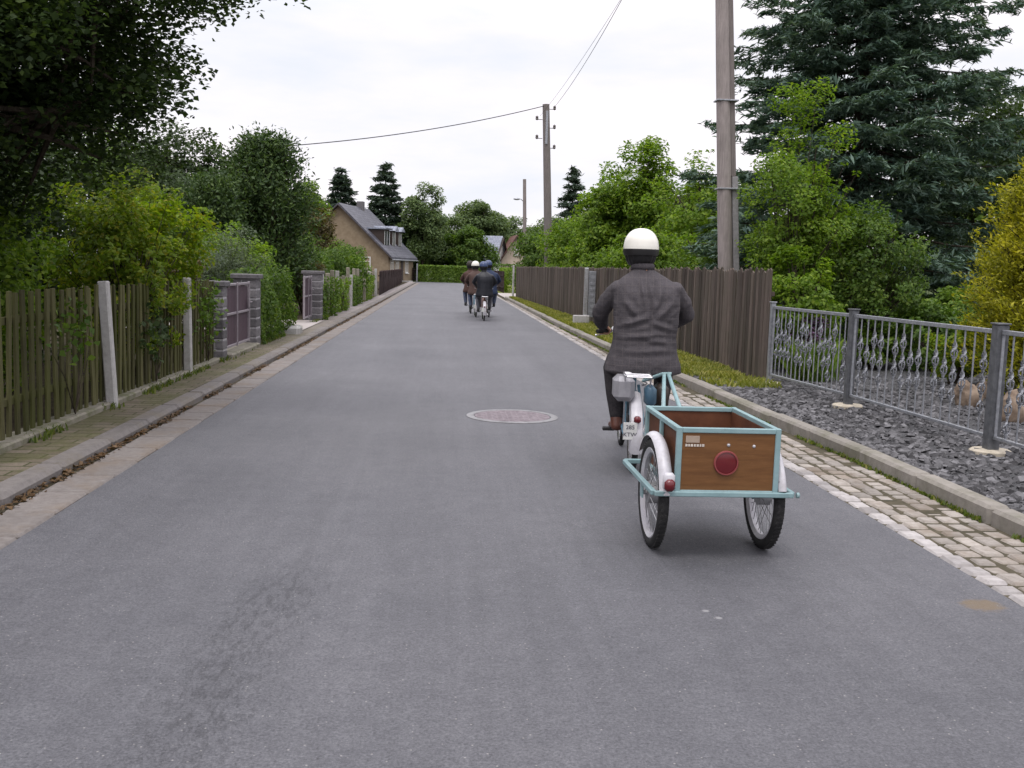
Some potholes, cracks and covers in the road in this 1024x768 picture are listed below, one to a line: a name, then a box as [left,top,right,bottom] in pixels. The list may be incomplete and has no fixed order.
manhole cover [466,409,558,424]
